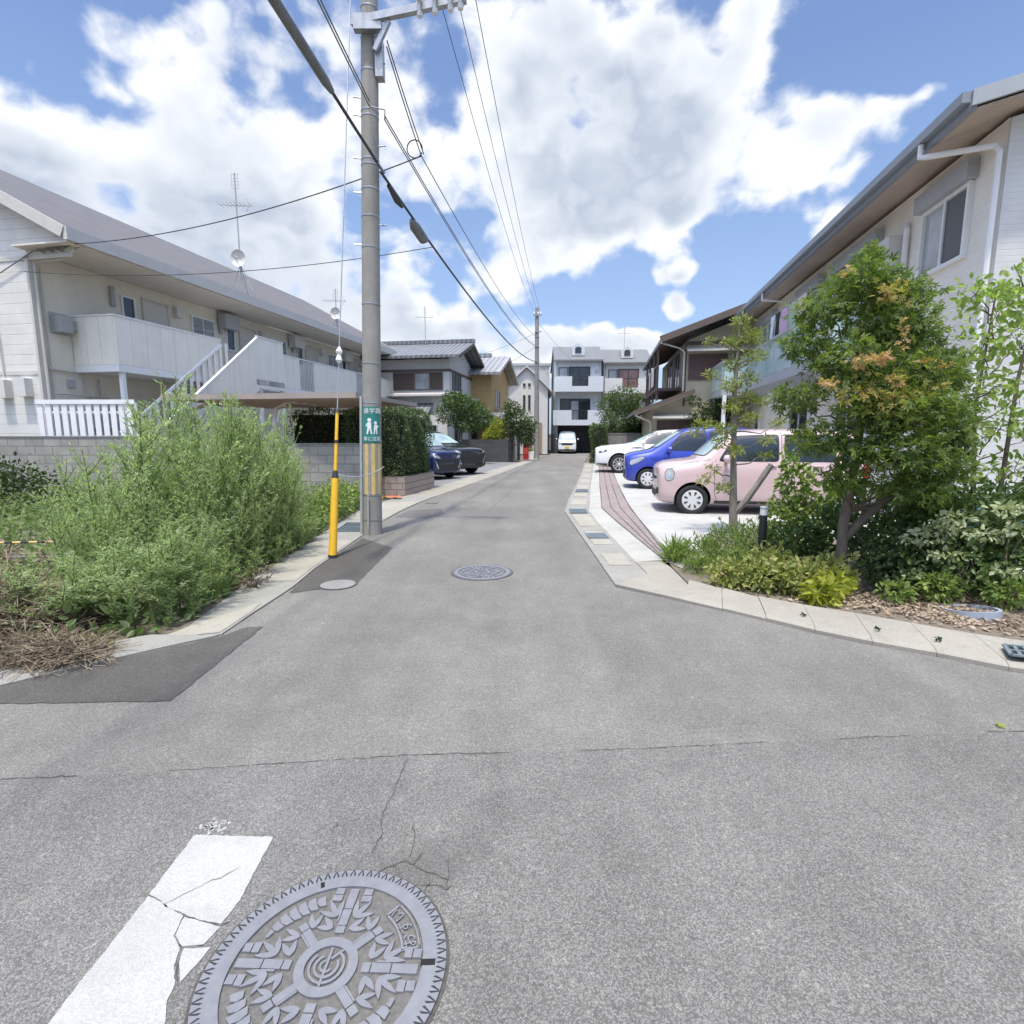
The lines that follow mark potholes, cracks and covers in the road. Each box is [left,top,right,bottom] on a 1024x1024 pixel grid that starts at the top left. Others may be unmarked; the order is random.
manhole cover [451,565,513,581]
crack [0,730,1024,891]
drain grate [1002,643,1024,658]
drain grate [337,522,360,532]
crack [148,868,238,983]
manhole cover [184,870,450,1024]
manhole cover [318,579,357,590]
